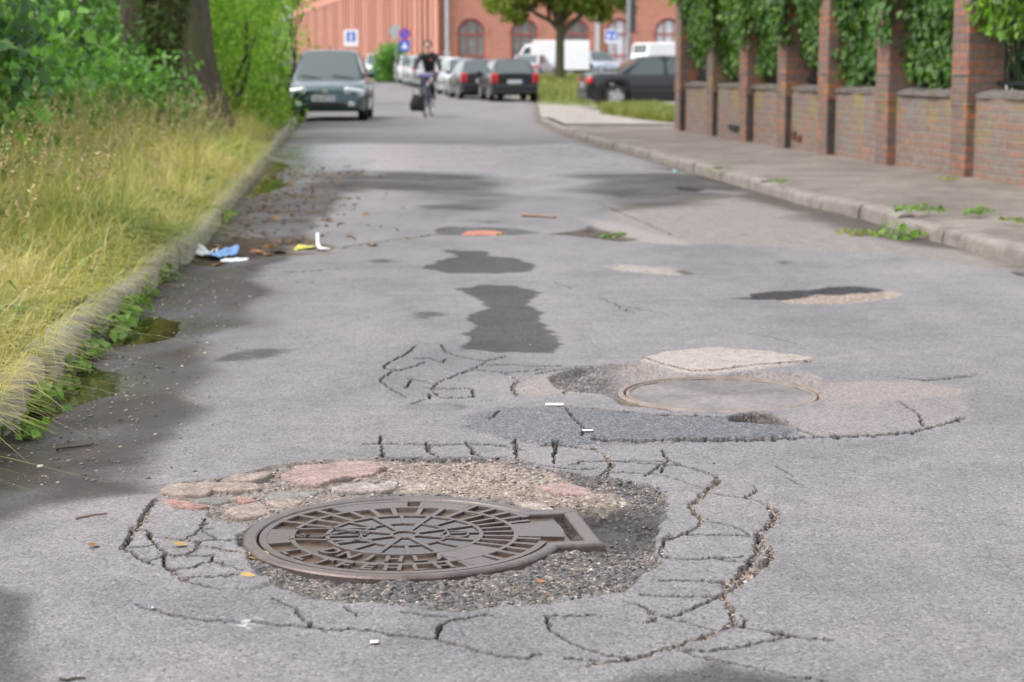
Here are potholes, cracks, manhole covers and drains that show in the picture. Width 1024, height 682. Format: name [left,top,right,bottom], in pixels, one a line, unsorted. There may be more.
manhole cover [243,496,604,584]
pothole [157,455,673,613]
pothole [724,411,798,428]
crack [118,344,967,682]
manhole cover [618,376,824,412]
